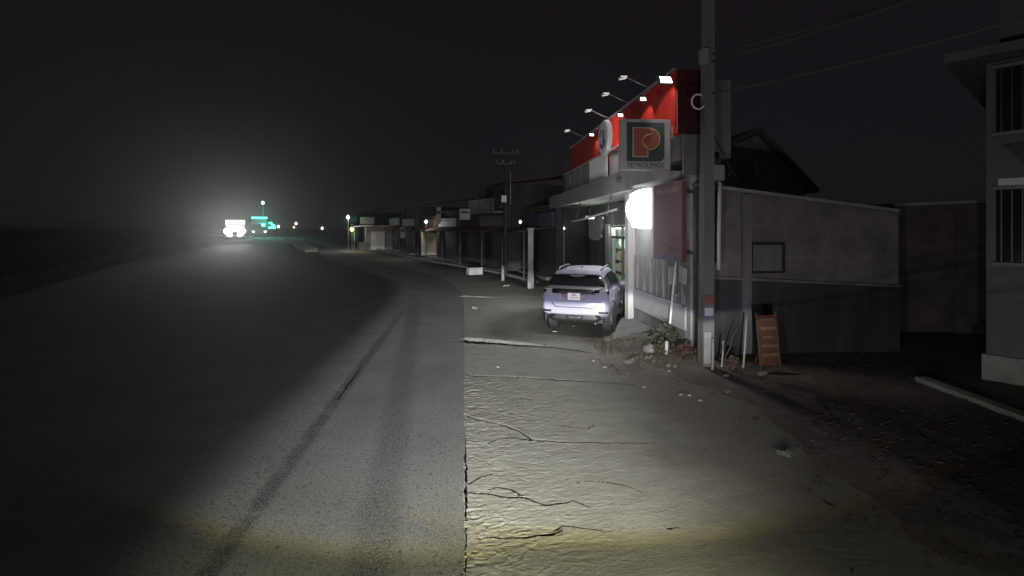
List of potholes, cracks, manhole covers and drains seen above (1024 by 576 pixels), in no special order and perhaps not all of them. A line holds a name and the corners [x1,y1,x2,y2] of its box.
crack [464,474,642,508]
crack [488,525,609,539]
crack [467,416,657,444]
crack [468,375,631,385]
